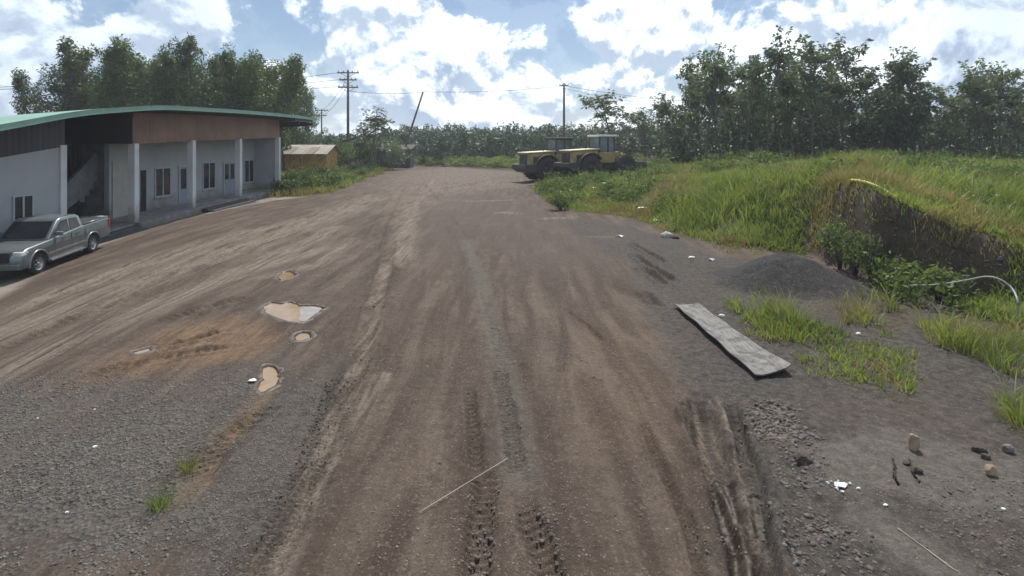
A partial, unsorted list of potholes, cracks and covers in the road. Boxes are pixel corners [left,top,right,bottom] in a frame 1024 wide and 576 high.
pothole [253,363,284,395]
pothole [272,270,299,281]
pothole [289,330,317,342]
pothole [125,345,157,356]
pothole [259,301,329,323]
